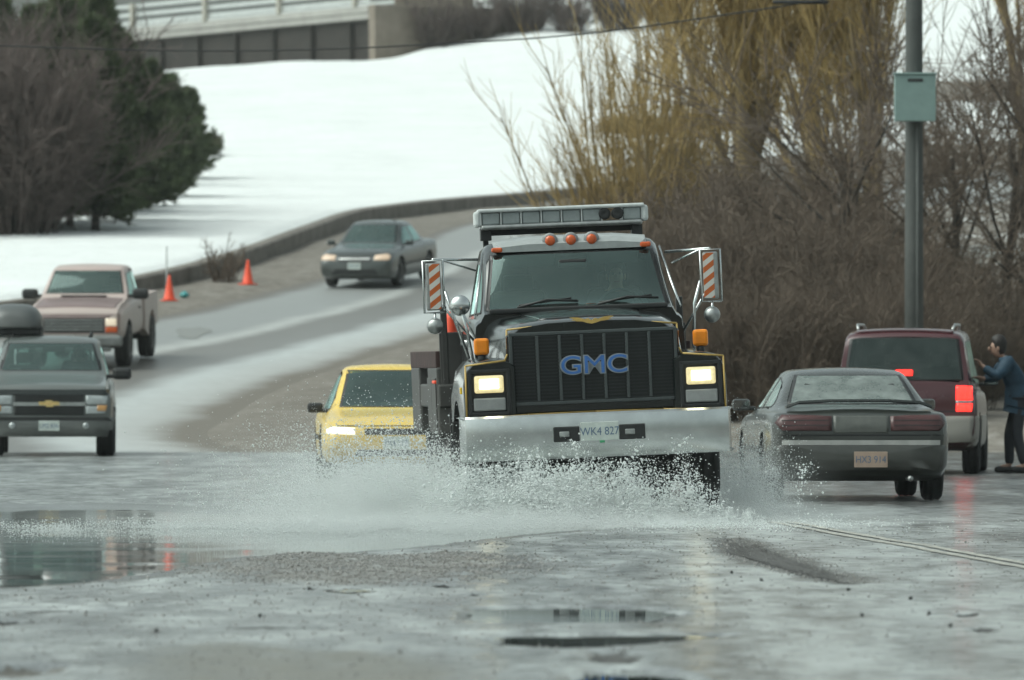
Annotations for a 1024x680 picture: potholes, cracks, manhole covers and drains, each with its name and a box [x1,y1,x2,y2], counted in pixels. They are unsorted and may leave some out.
pothole [492,635,726,648]
pothole [467,607,679,624]
